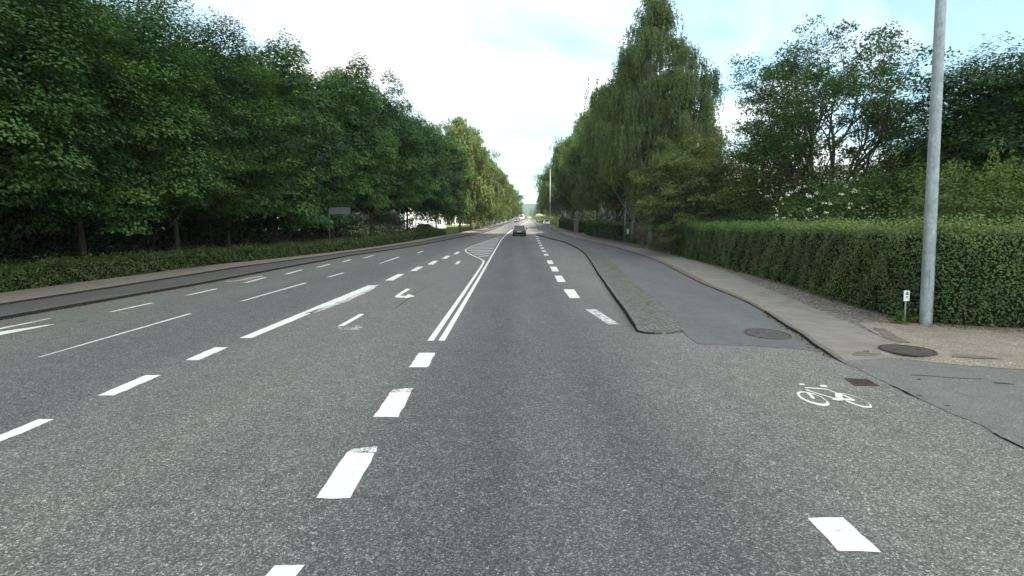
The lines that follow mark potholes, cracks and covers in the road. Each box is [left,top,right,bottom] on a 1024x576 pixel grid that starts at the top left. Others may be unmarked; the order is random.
manhole cover [878,344,938,357]
drain grate [844,378,879,386]
manhole cover [744,328,792,340]
